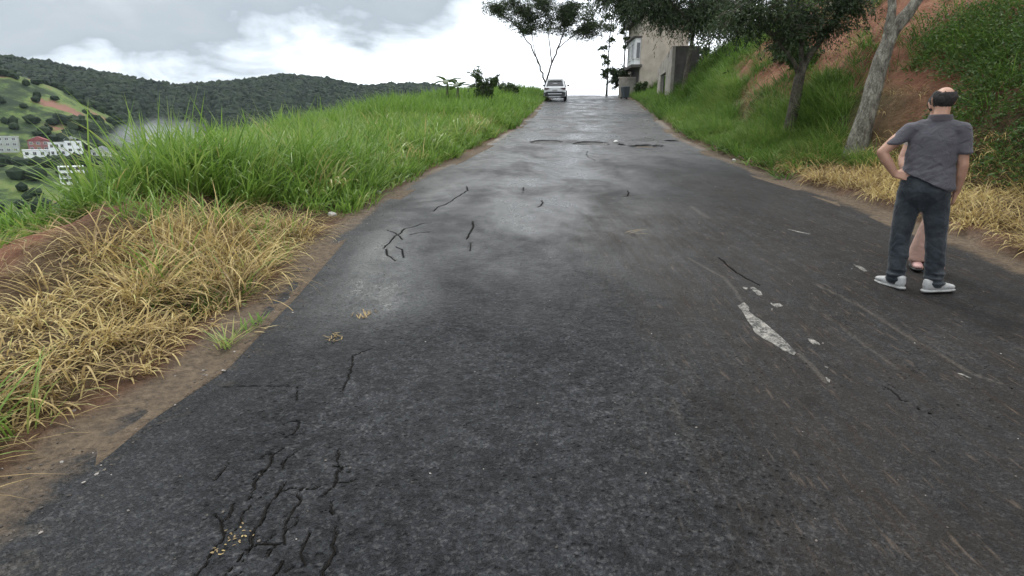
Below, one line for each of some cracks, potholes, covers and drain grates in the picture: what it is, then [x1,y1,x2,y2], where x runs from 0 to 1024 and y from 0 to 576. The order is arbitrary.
crack [196,421,356,576]
crack [719,258,760,286]
crack [383,186,469,261]
